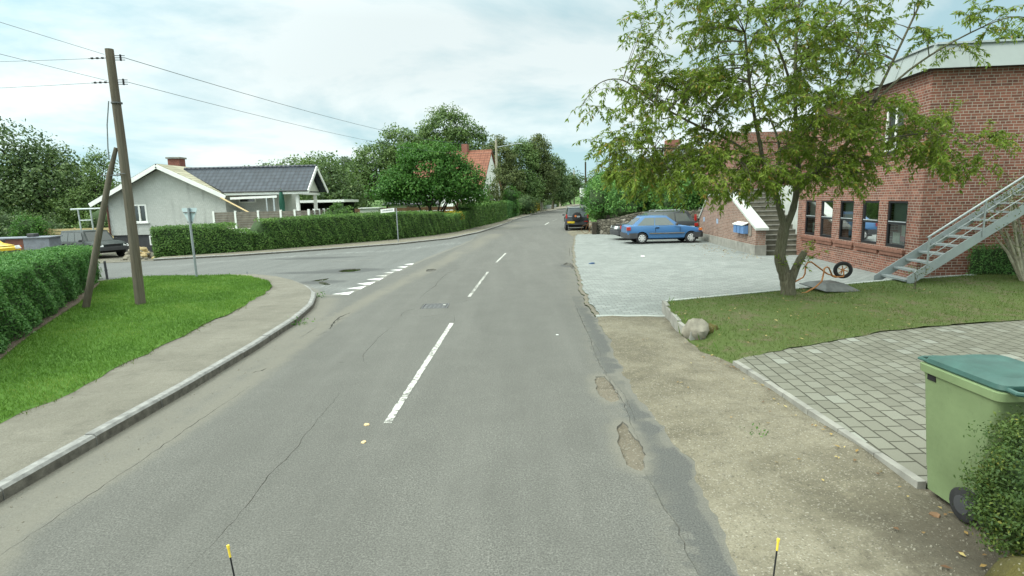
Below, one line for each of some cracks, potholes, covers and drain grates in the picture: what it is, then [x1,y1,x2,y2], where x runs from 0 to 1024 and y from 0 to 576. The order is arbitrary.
pothole [595,376,620,402]
crack [189,336,380,567]
pothole [617,421,646,471]
